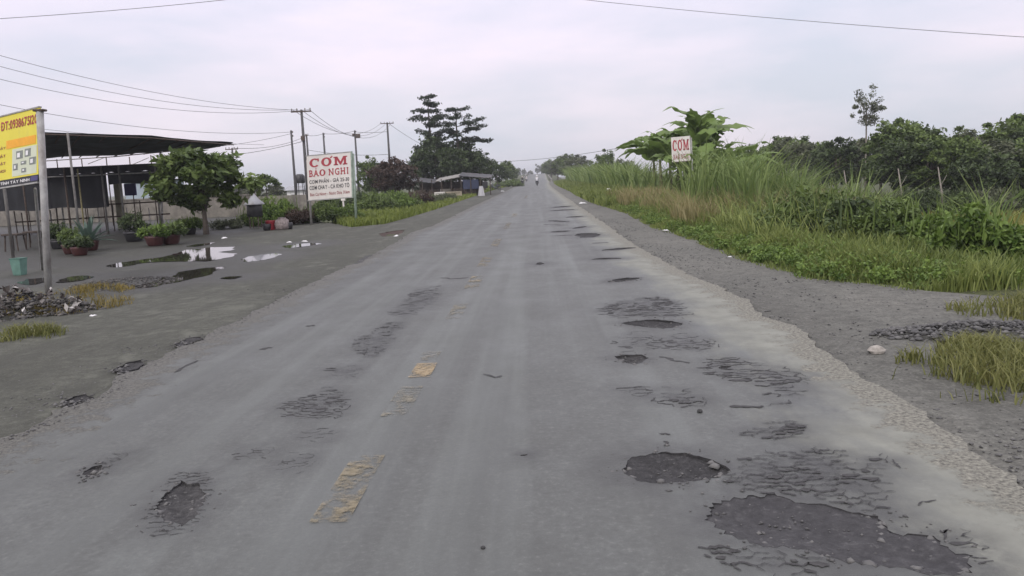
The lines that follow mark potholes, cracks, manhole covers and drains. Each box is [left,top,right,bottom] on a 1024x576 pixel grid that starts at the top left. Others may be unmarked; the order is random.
crack [231,277,469,472]
pothole [75,462,110,483]
pothole [605,352,657,365]
pothole [620,317,692,330]
pothole [104,359,156,375]
pothole [130,472,226,532]
crack [595,296,901,510]
pothole [169,334,215,348]
pothole [599,444,752,492]
pothole [690,484,999,576]
pothole [51,392,102,408]
